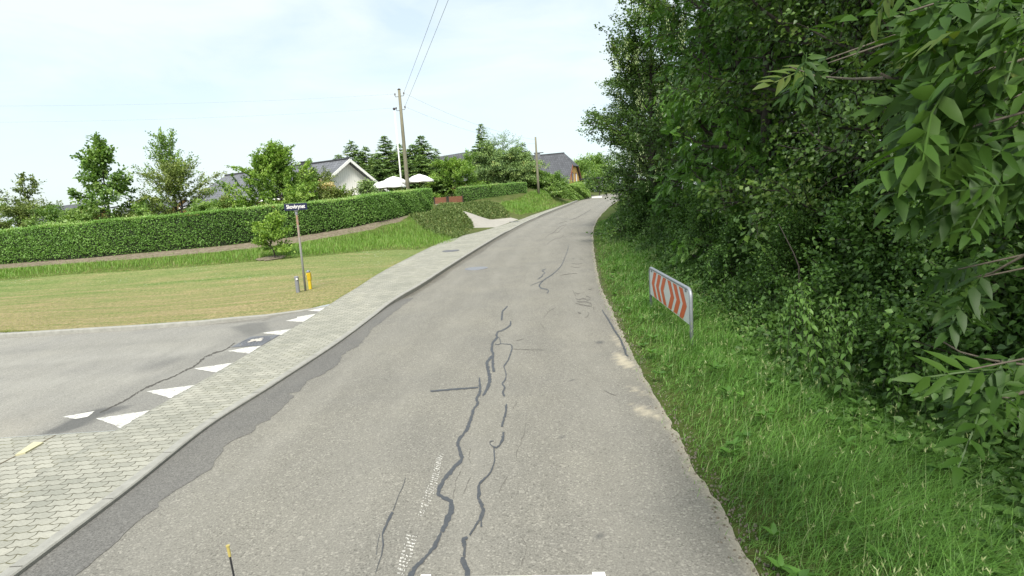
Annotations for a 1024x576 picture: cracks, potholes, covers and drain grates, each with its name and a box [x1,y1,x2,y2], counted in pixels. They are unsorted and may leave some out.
crack [564,258,594,315]
